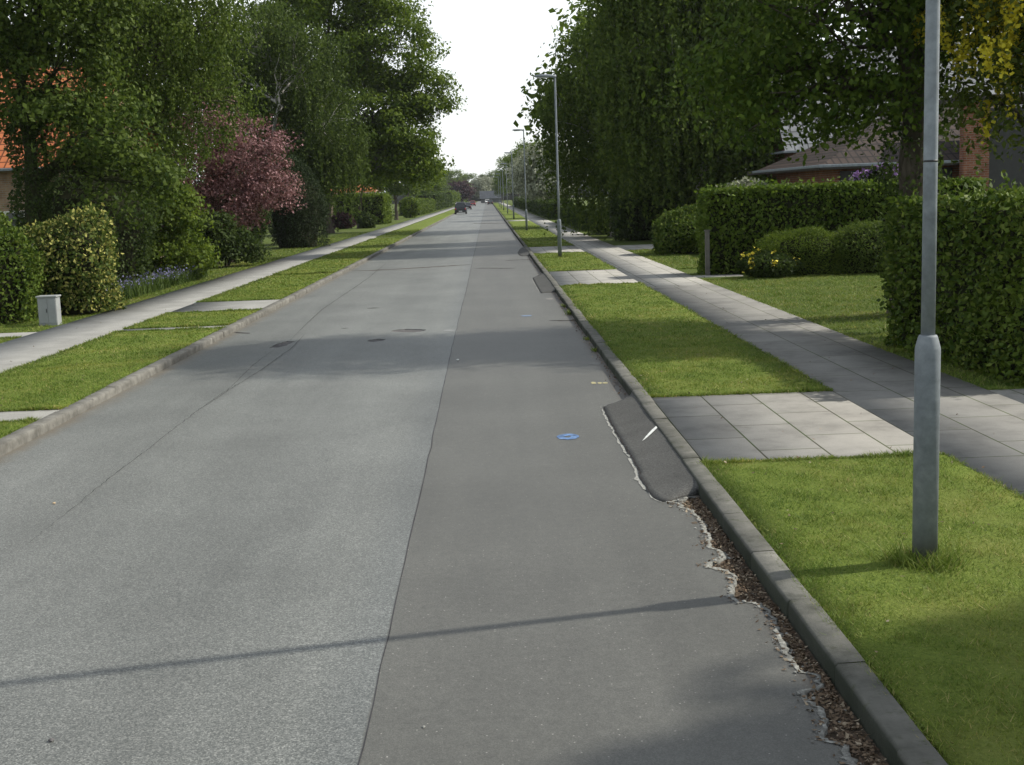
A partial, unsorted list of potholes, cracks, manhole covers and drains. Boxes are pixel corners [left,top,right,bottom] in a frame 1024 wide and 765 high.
pothole [666,496,889,765]
